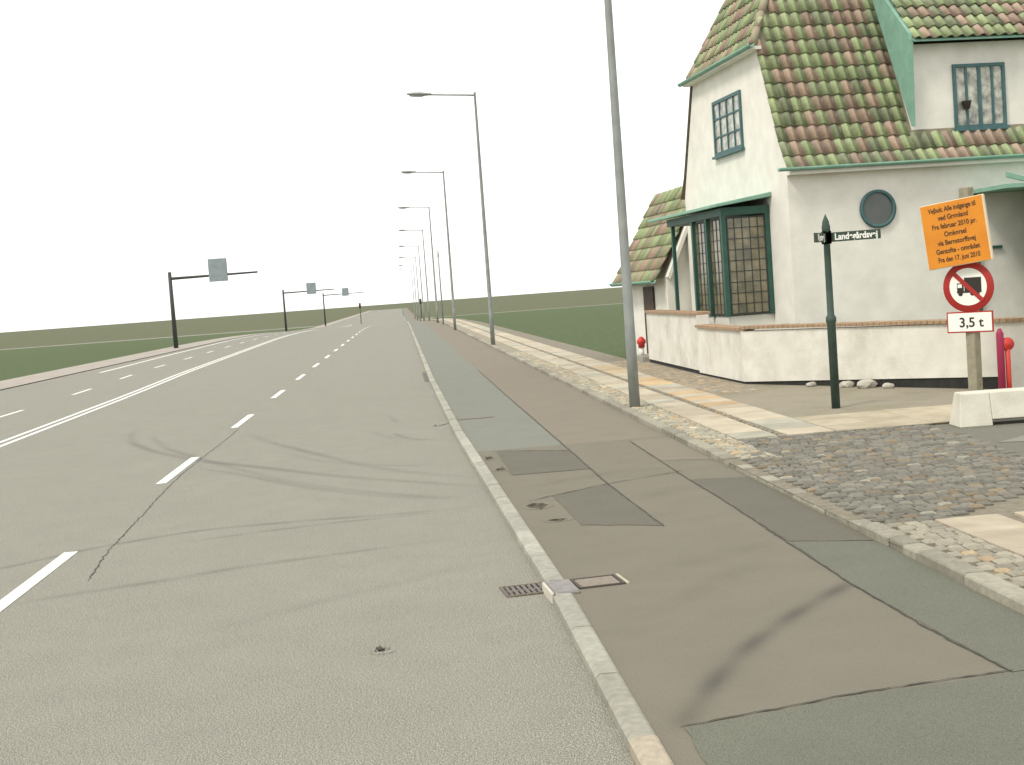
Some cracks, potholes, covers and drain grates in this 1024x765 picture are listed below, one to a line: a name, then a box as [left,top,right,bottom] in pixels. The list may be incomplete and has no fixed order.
manhole cover [569,573,630,589]
pothole [369,646,396,654]
drain grate [499,582,544,598]
